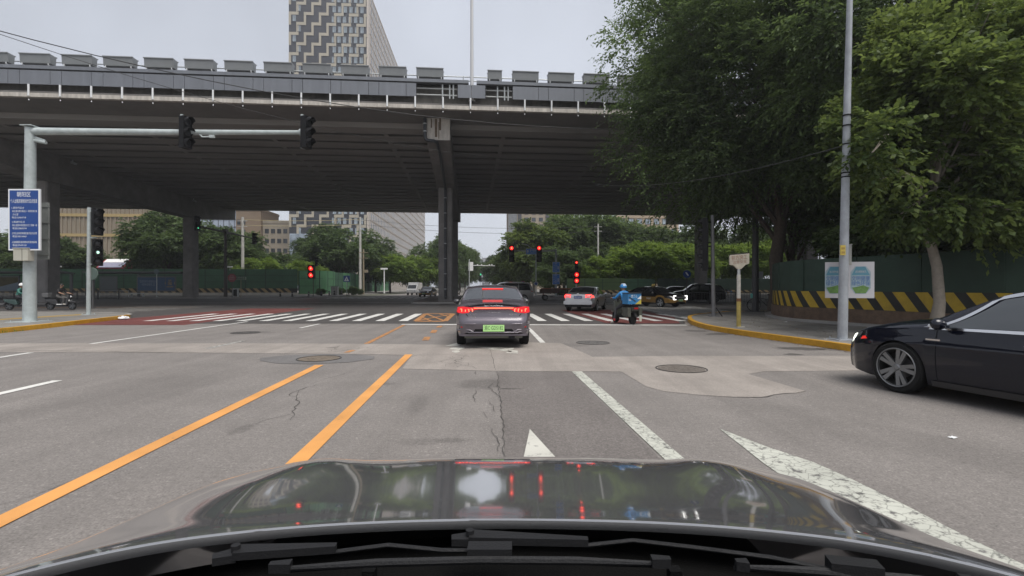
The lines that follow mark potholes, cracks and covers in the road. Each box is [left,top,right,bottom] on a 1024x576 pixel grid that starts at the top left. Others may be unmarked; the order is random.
manhole cover [655,364,708,373]
crack [444,349,508,456]
